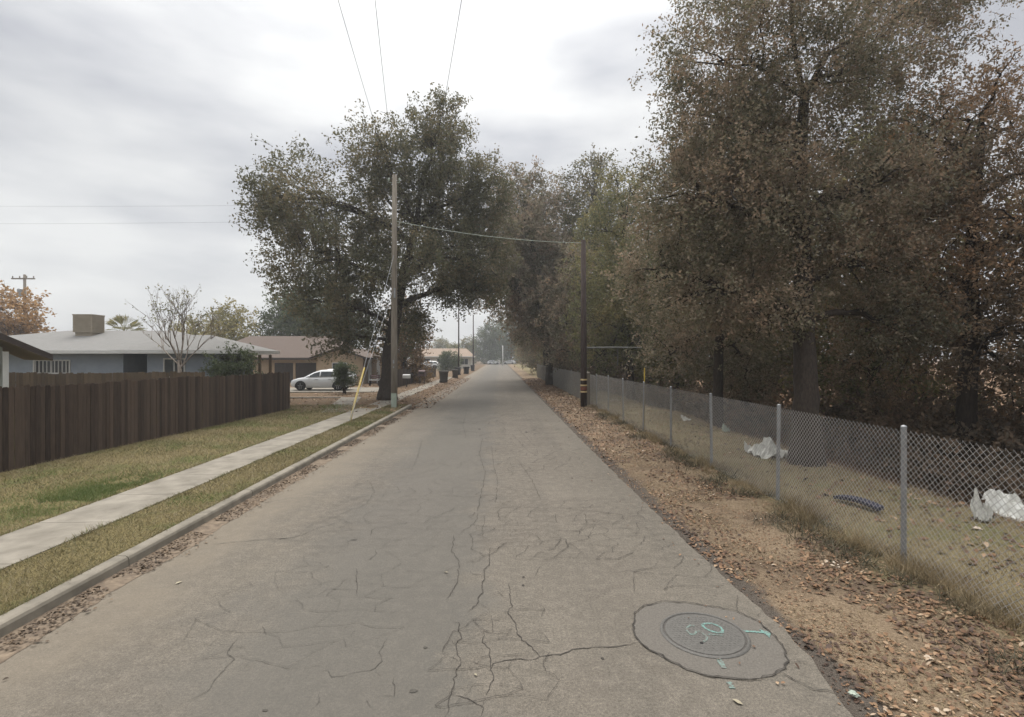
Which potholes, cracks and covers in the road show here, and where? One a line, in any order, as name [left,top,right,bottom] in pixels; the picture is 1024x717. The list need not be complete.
crack [142,410,738,716]
manhole cover [660,612,751,659]
